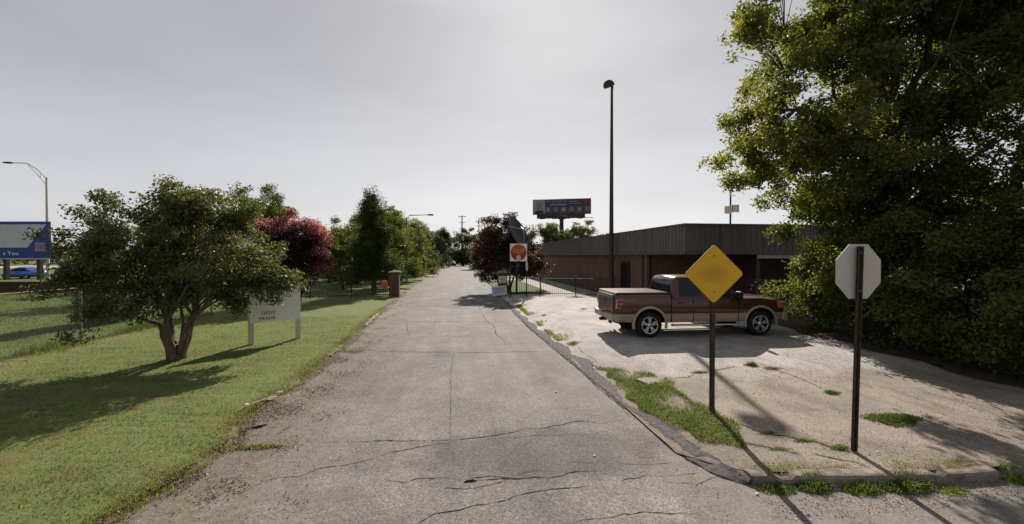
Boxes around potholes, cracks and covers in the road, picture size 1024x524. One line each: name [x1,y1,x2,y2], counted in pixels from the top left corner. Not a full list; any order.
crack [237,420,629,496]
crack [389,435,717,524]
crack [481,302,623,409]
